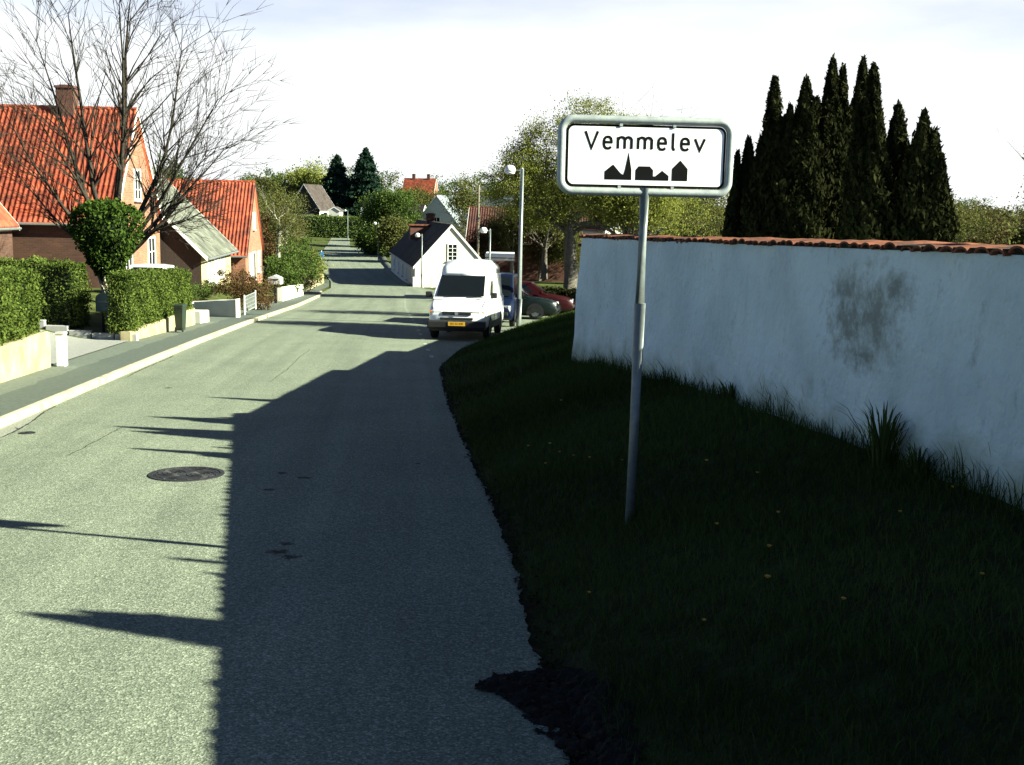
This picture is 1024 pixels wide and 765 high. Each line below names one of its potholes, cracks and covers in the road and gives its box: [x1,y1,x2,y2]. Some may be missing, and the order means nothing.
crack [0,406,56,438]
manhole cover [148,466,225,482]
